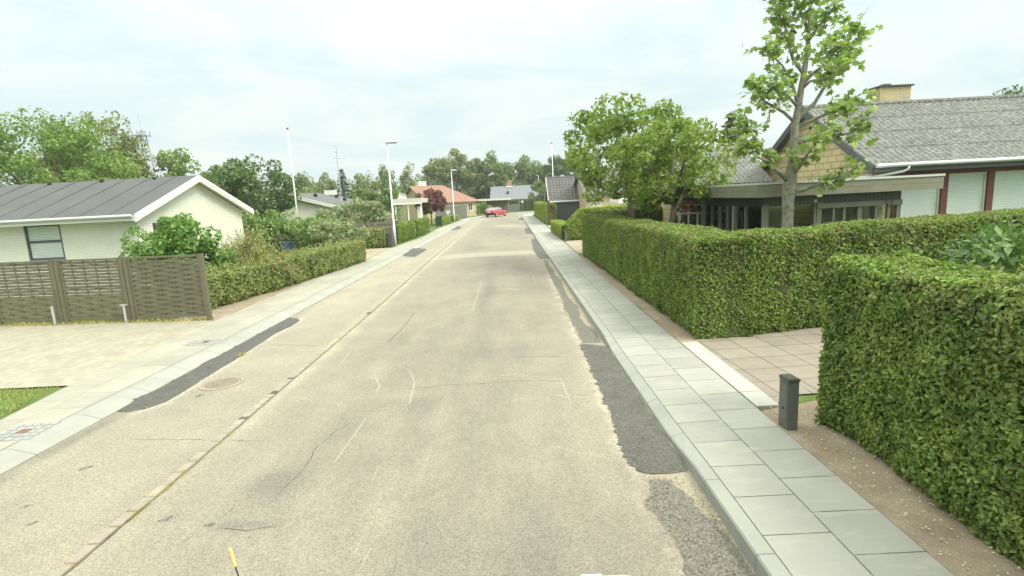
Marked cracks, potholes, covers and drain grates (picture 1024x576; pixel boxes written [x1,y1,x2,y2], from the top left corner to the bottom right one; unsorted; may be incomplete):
crack [64,218,485,576]
manhole cover [198,376,244,391]
